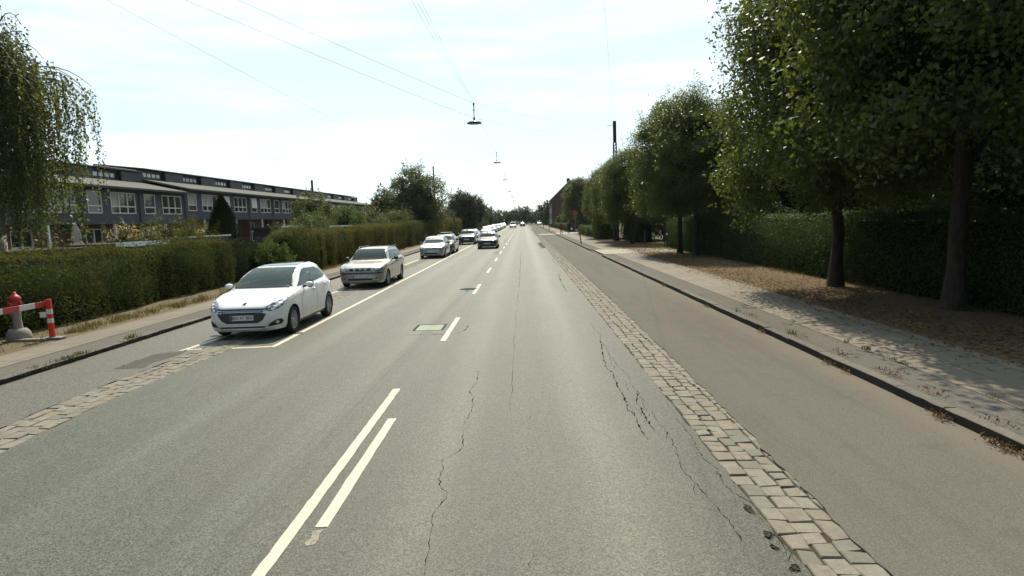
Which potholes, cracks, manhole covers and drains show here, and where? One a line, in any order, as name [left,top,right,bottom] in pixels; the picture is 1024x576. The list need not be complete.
crack [424,371,479,576]
crack [590,323,802,573]
